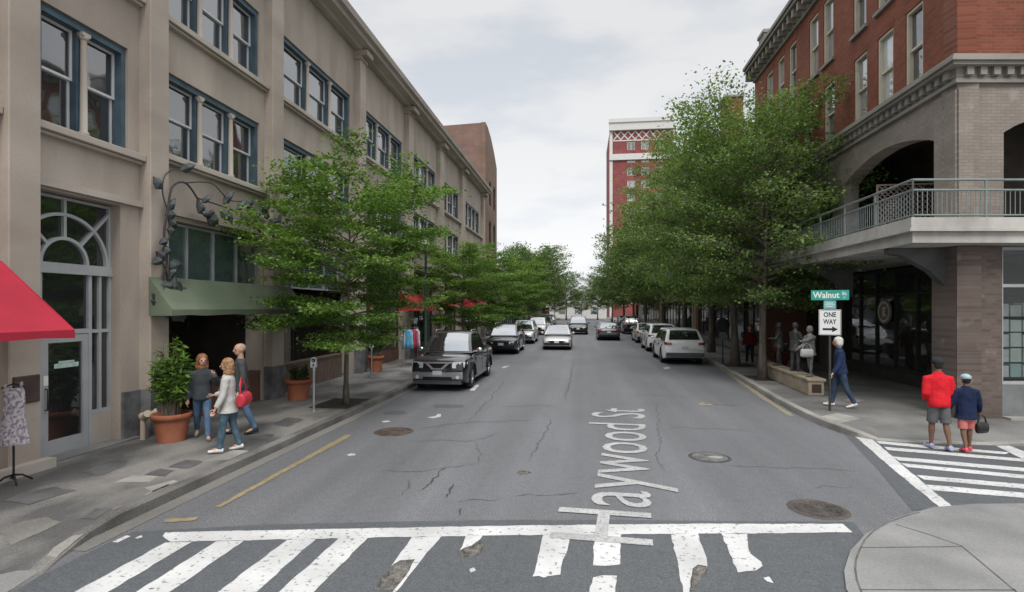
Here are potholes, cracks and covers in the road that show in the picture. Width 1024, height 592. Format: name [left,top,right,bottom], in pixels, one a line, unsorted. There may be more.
manhole cover [374,427,414,436]
manhole cover [786,499,851,520]
manhole cover [688,452,732,463]
crack [655,395,734,473]
crack [381,405,576,516]
